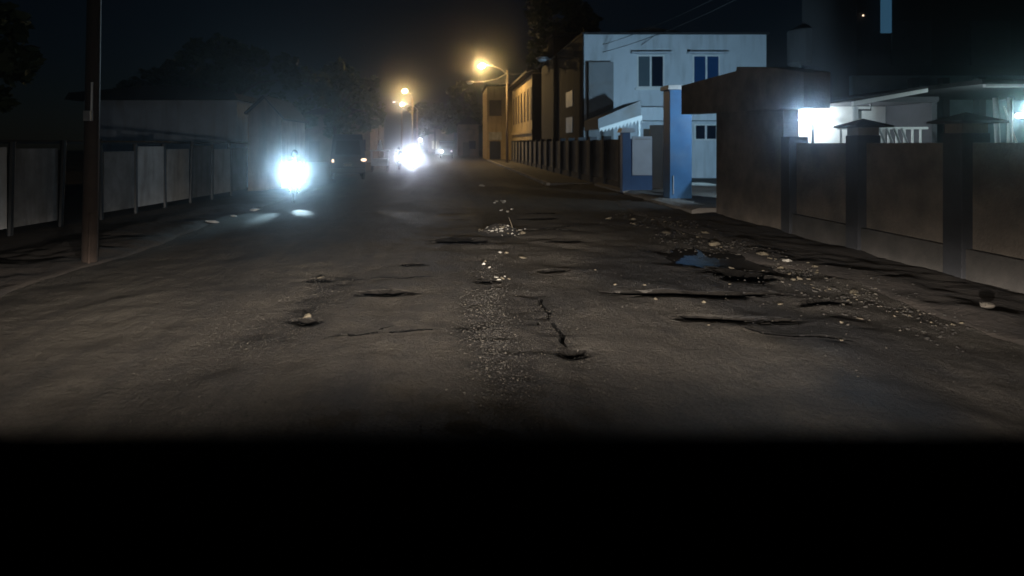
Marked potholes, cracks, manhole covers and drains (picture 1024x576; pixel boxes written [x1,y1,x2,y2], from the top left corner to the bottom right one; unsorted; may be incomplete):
pothole [690,266,786,285]
crack [320,324,439,341]
pothole [664,314,775,323]
pothole [555,348,590,361]
pothole [795,298,855,307]
pothole [592,289,801,299]
pothole [287,318,321,326]
pothole [352,289,425,297]
pothole [644,245,794,276]
crack [527,297,579,348]
